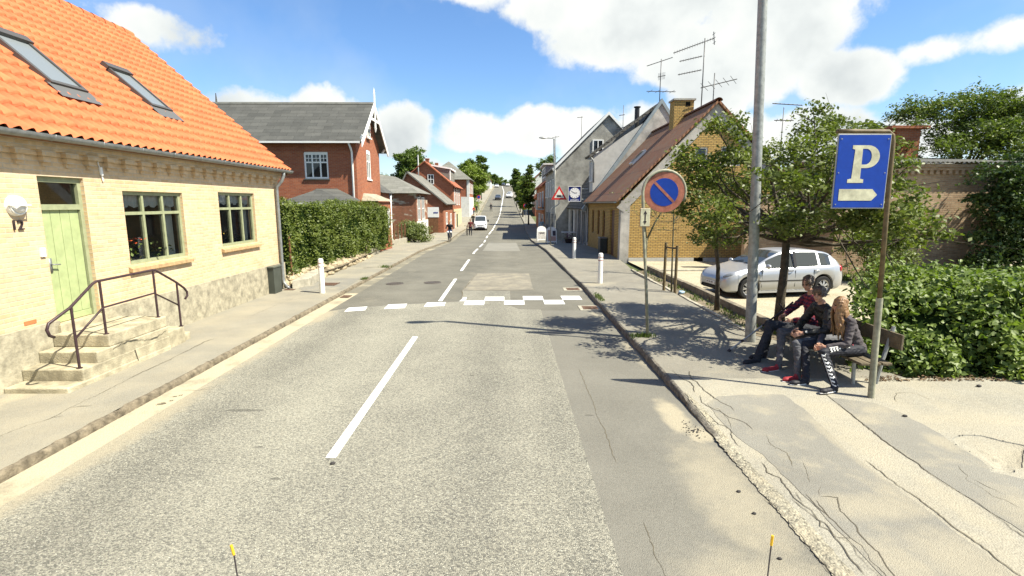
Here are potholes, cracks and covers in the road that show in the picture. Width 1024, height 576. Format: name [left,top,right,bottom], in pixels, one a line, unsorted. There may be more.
crack [764,434,895,576]
crack [579,370,616,461]
crack [678,371,749,448]
